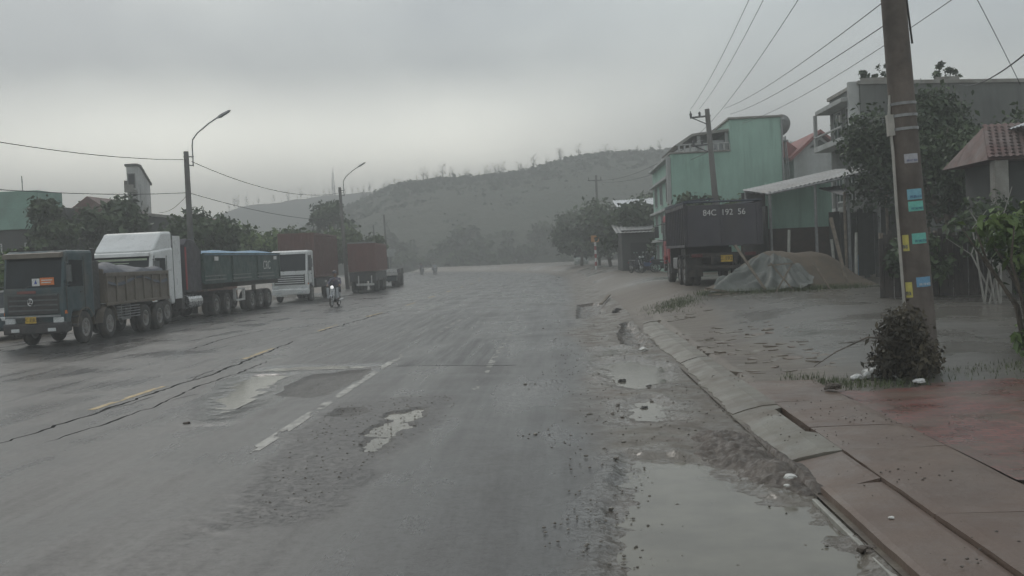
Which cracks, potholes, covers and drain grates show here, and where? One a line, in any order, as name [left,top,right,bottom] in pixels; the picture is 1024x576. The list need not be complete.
pothole [616,321,652,348]
pothole [575,301,607,319]
crack [1,309,400,443]
pothole [357,406,432,456]
